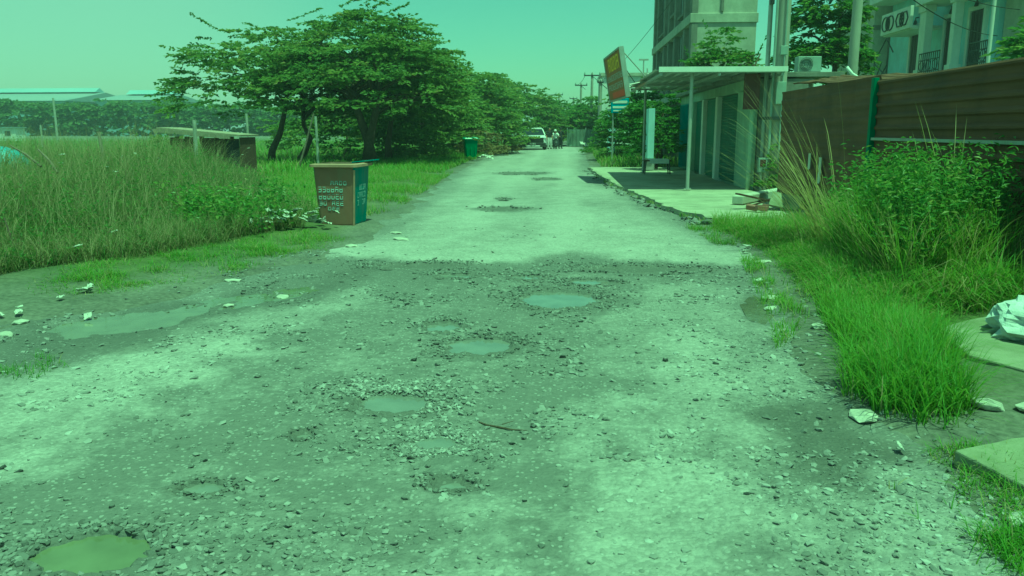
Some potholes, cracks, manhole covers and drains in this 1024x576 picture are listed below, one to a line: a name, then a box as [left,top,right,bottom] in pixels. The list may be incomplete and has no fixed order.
pothole [412,469,491,496]
pothole [488,280,642,321]
pothole [165,474,245,500]
pothole [319,372,507,422]
pothole [407,315,481,339]
pothole [542,276,640,287]
pothole [0,503,221,576]
pothole [417,324,543,367]
pothole [277,426,324,442]
pothole [466,204,542,212]
pothole [361,419,497,463]
